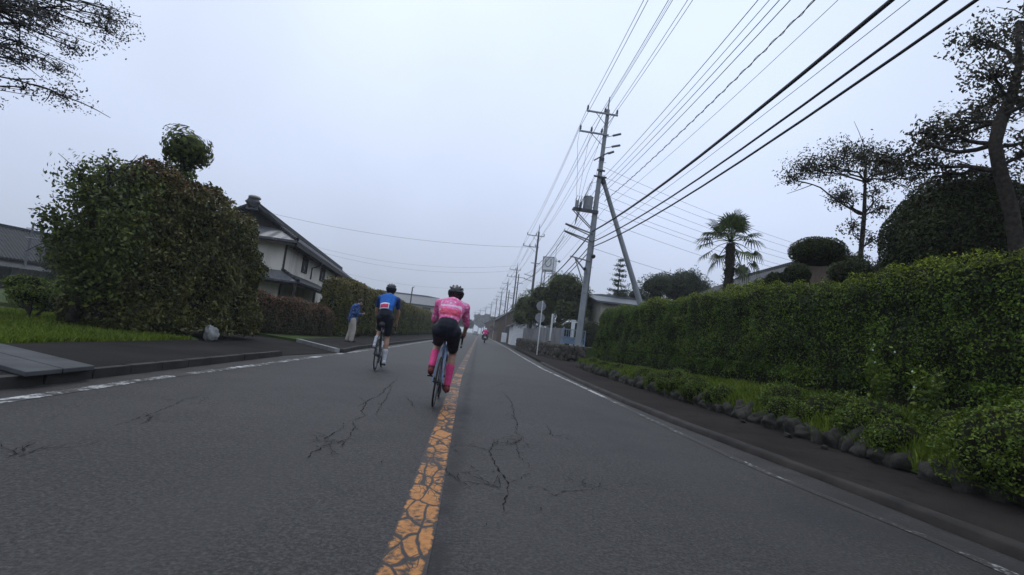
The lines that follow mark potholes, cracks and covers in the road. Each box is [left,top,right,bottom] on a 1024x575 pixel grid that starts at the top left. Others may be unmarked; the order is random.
crack [443,384,620,514]
crack [308,379,421,457]
crack [124,395,216,424]
crack [0,441,95,457]
